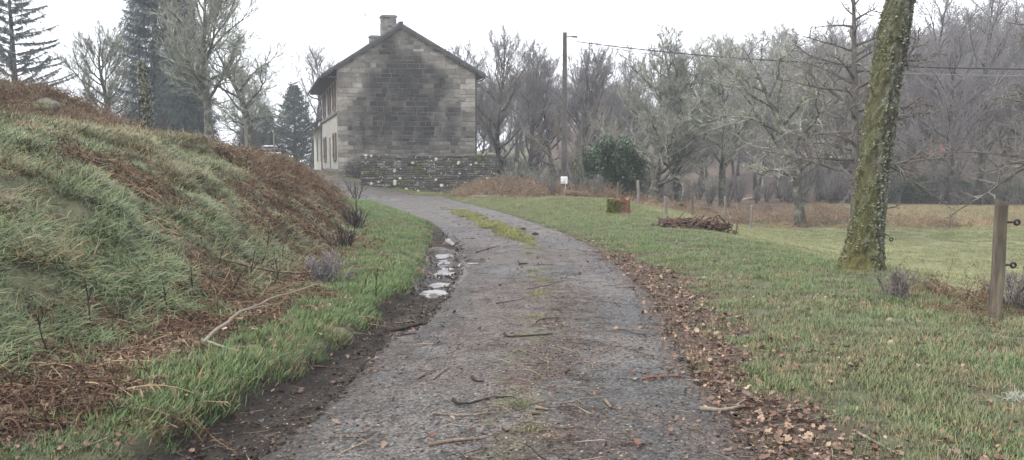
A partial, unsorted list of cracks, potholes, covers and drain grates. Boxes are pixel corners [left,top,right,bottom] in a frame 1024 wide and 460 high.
pothole [413,246,470,299]
